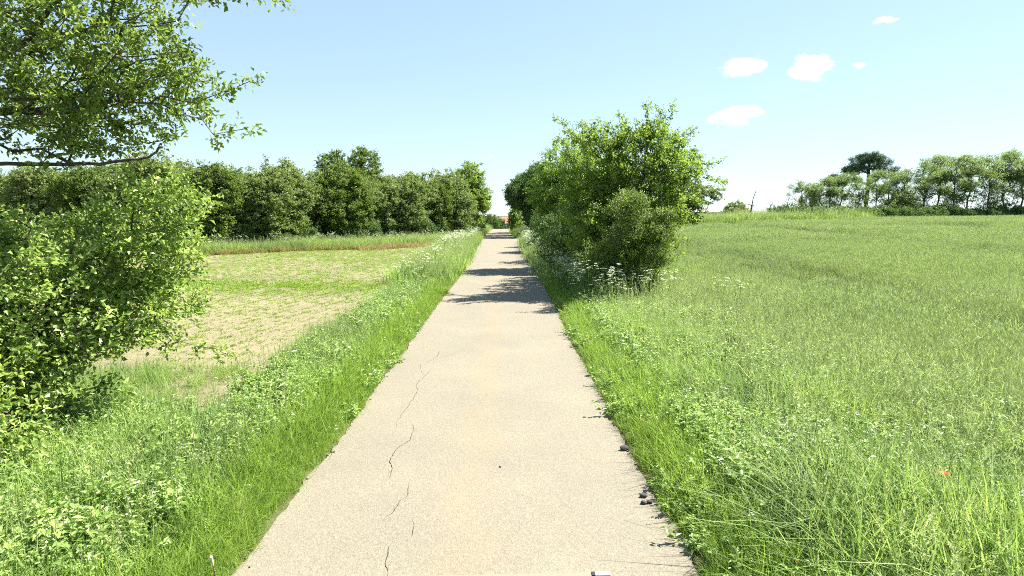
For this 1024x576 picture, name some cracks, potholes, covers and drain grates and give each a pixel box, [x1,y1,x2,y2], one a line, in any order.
crack [385,355,438,537]
